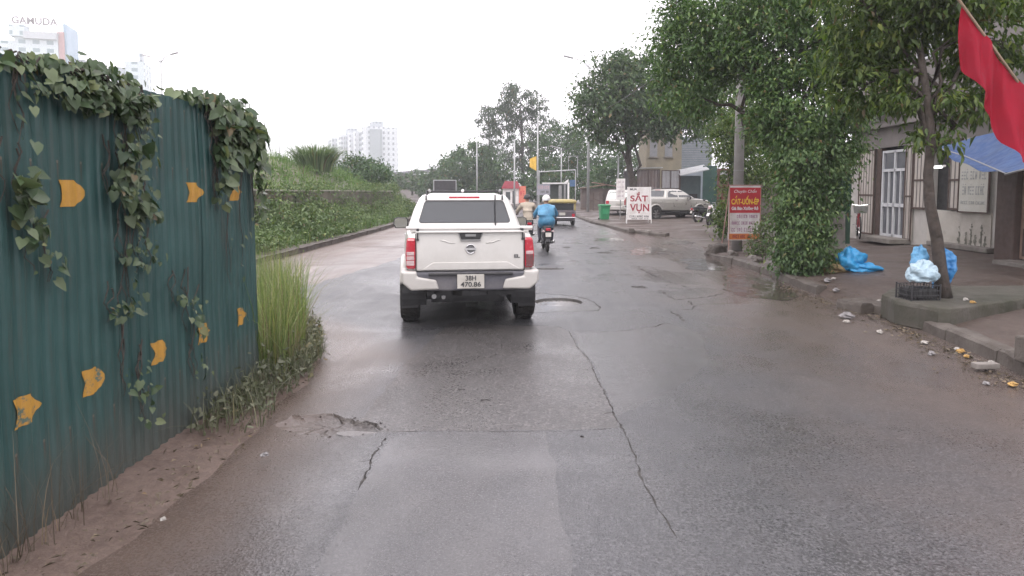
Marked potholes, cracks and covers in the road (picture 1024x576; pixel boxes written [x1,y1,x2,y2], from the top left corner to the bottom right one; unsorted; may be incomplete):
pothole [272,413,389,437]
crack [623,269,720,331]
manhole cover [535,298,583,306]
crack [358,438,386,490]
crack [522,293,677,537]
